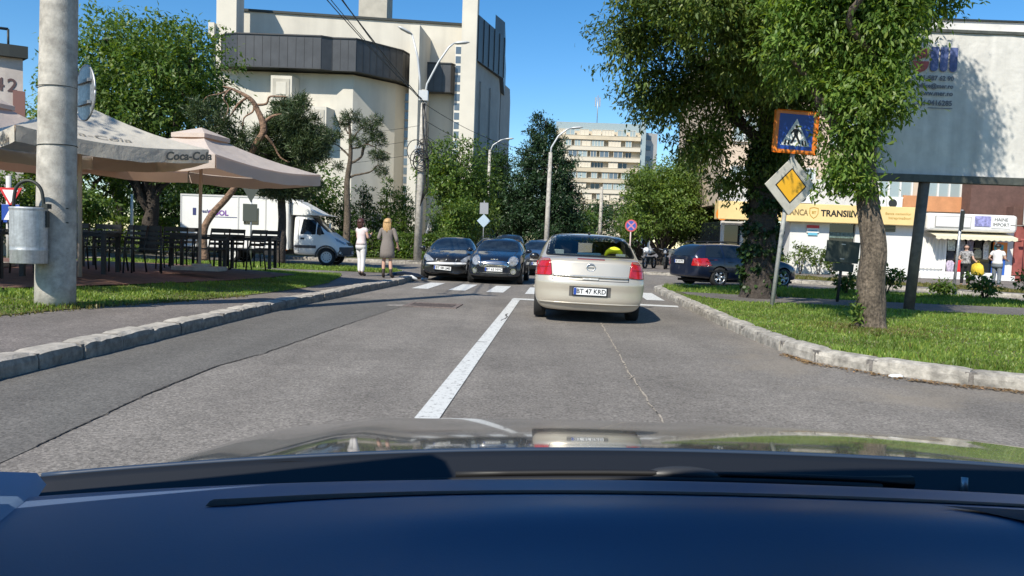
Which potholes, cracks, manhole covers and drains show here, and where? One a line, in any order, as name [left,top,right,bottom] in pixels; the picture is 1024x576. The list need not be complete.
crack [601,323,664,423]
